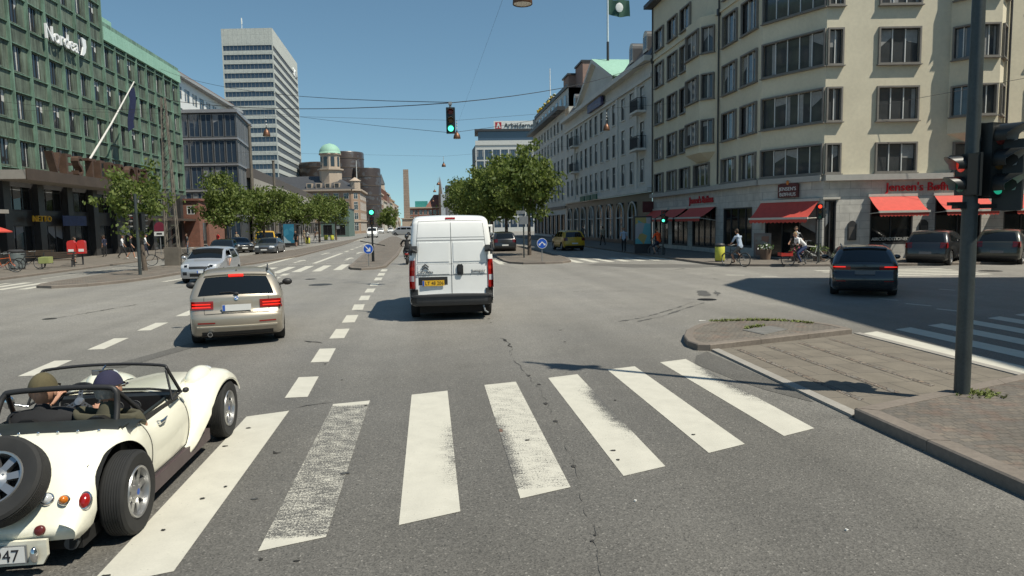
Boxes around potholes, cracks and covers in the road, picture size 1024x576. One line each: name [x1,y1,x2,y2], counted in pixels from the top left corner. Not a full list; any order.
manhole cover [744,326,788,335]
